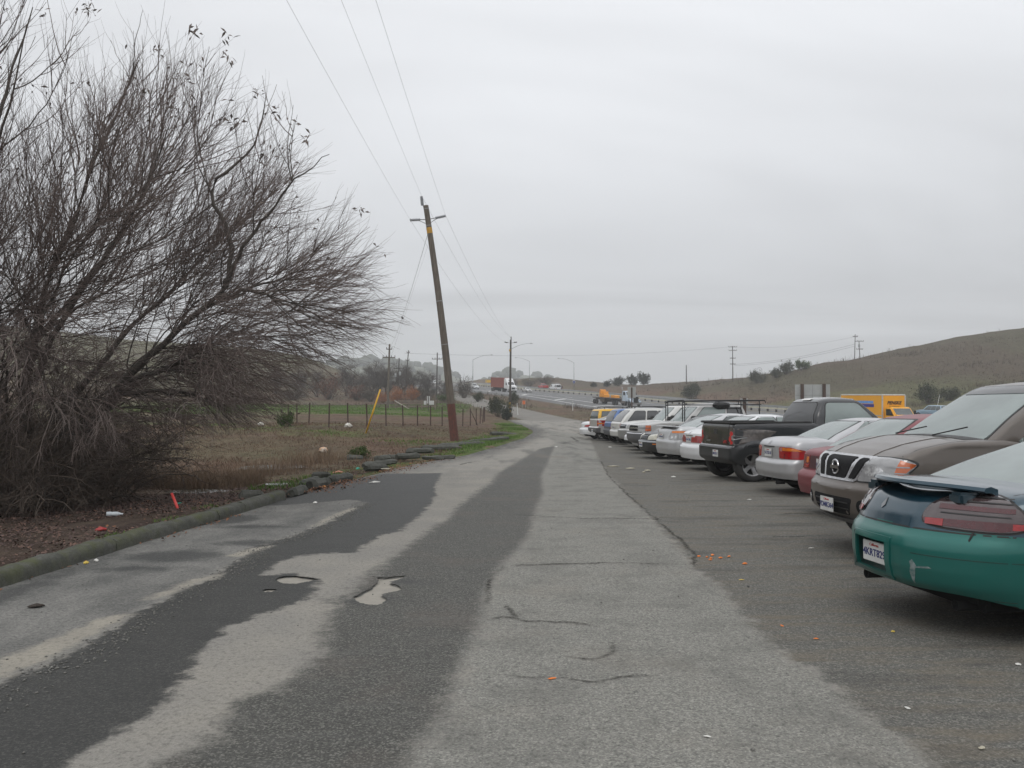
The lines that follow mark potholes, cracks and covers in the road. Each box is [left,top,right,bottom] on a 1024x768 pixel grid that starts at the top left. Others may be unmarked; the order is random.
pothole [276,576,318,584]
pothole [354,575,406,605]
